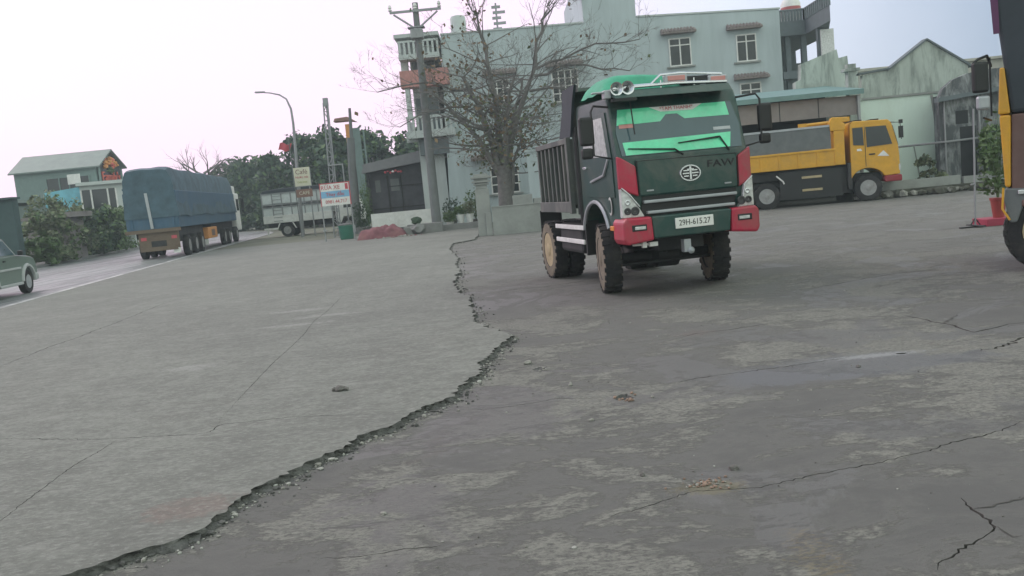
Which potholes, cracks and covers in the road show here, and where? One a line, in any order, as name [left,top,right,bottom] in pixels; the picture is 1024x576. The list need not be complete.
crack [611,421,1022,517]
crack [0,235,573,576]
crack [908,315,1024,350]
crack [937,497,1024,570]
